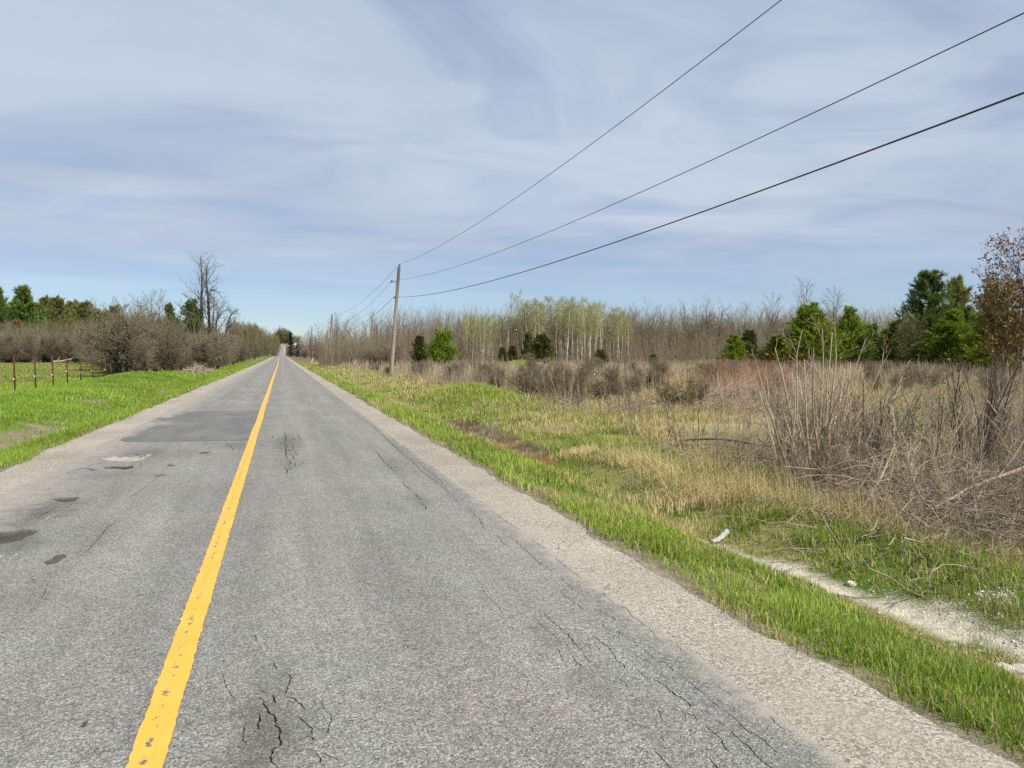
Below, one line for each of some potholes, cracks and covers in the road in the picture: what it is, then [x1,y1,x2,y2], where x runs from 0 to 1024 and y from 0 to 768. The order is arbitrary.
pothole [0,529,39,544]
crack [272,433,303,473]
pothole [43,554,66,565]
crack [242,663,339,768]
crack [369,423,454,509]
crack [467,499,583,609]
crack [536,595,789,768]
